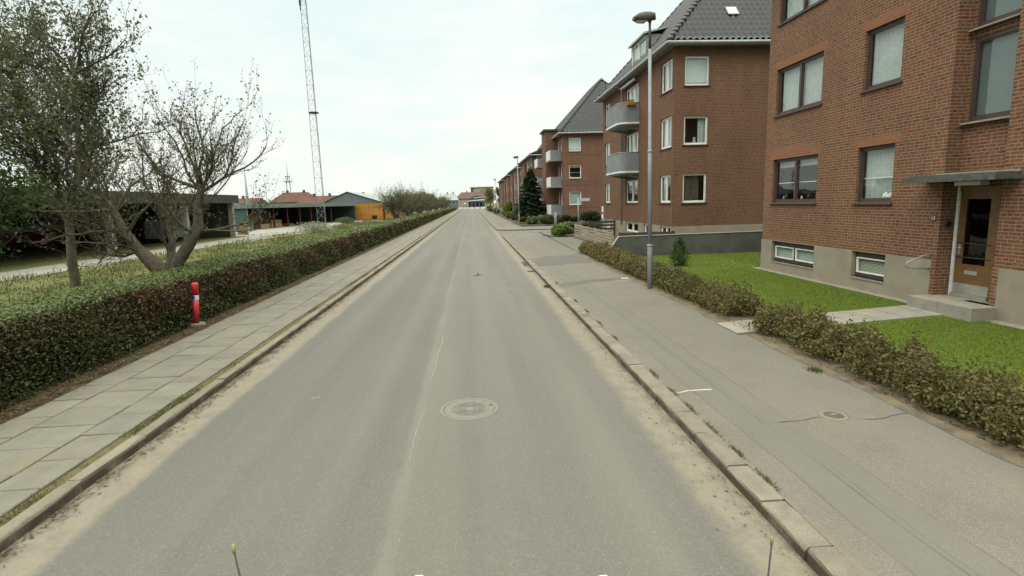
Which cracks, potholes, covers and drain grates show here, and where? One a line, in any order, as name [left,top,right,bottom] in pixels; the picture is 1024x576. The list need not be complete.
utility cover [818,410,849,421]
crack [405,405,426,467]
manhole cover [440,398,499,420]
